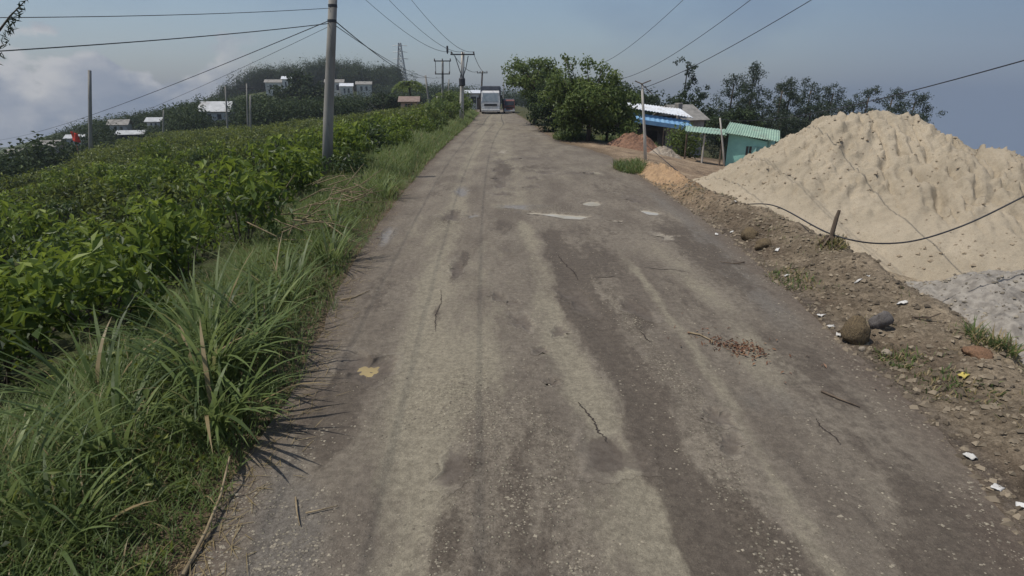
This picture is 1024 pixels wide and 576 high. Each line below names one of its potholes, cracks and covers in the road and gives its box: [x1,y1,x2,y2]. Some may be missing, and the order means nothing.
crack [578,402,607,441]
